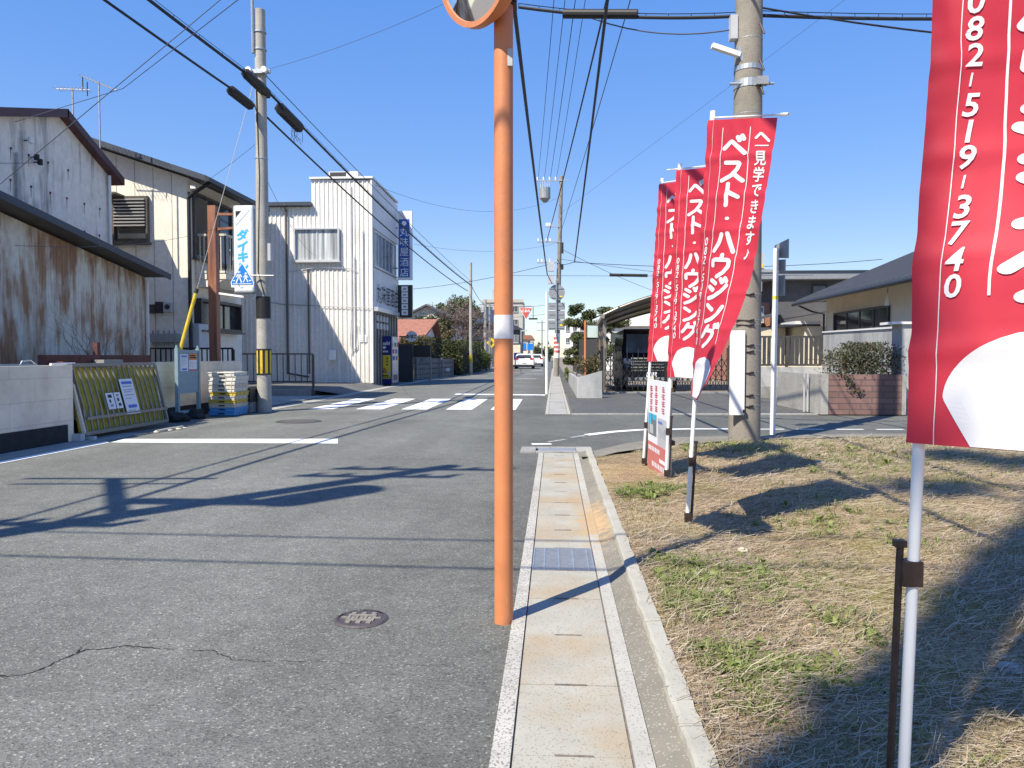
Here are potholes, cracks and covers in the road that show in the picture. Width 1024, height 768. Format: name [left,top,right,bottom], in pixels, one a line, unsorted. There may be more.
drain grate [532,548,595,571]
manhole cover [334,609,388,629]
crack [0,641,448,677]
